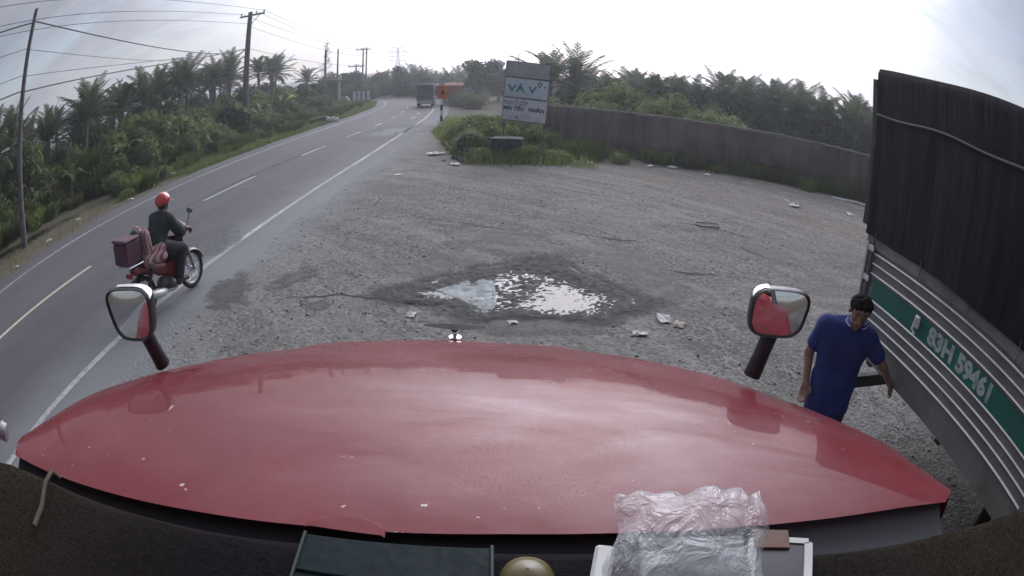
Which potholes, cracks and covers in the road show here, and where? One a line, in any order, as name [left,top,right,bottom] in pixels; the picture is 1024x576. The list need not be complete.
pothole [369,256,660,323]
